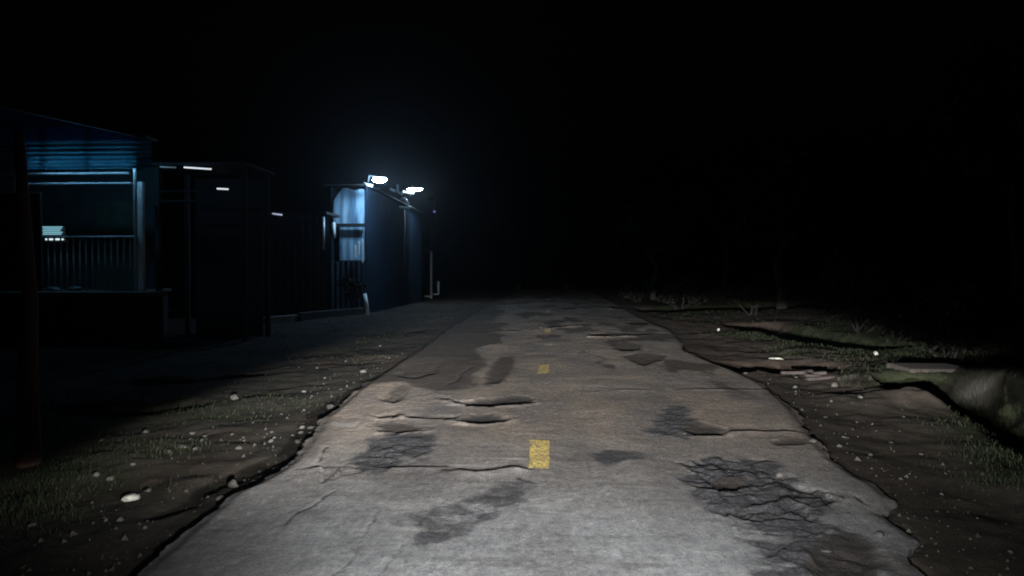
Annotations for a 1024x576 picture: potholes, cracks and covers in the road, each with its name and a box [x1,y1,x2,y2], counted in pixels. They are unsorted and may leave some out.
pothole [436,394,541,407]
pothole [765,436,820,446]
pothole [450,412,516,426]
pothole [479,355,521,384]
pothole [618,352,671,367]
crack [280,429,540,576]
pothole [373,381,419,404]
crack [580,388,894,576]
